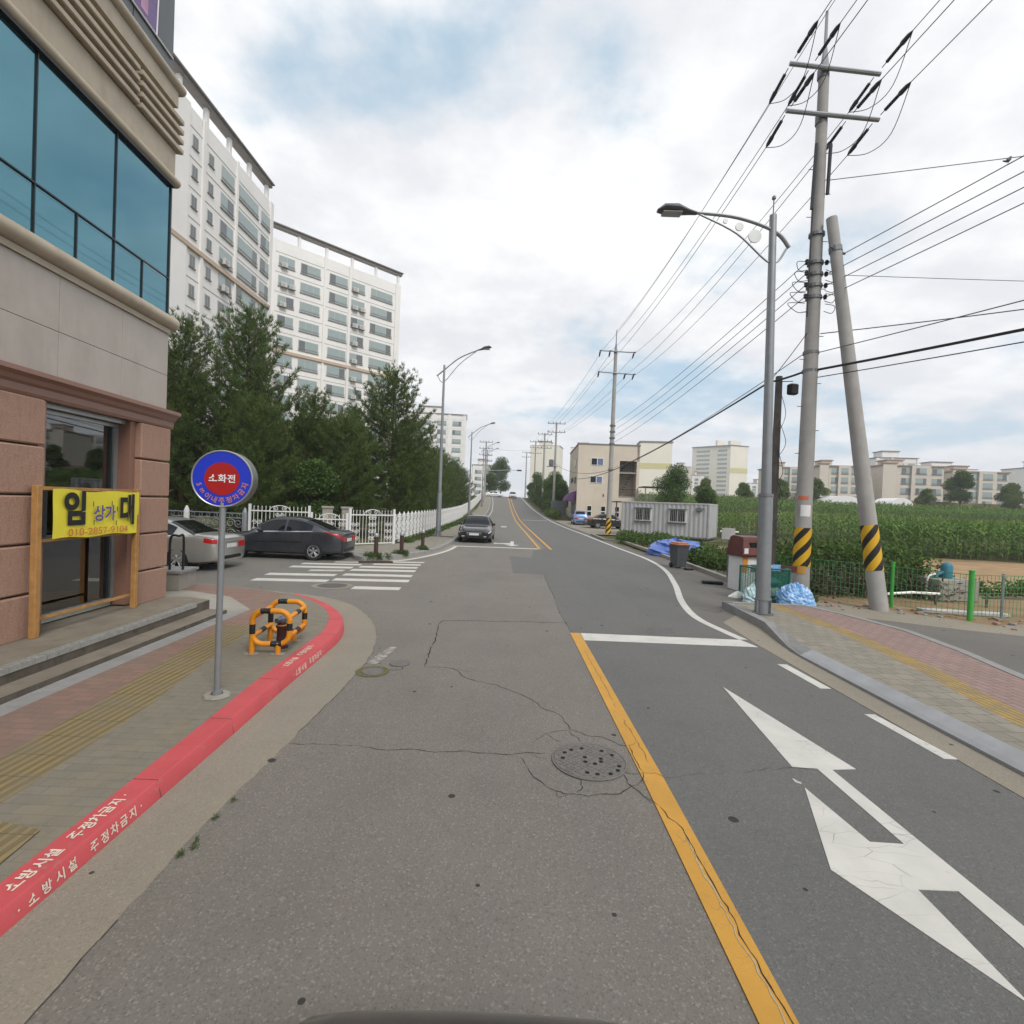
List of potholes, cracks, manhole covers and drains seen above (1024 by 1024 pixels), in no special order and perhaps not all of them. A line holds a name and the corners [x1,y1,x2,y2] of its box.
crack [289,655,664,804]
manhole cover [355,666,389,677]
crack [663,810,794,1024]
manhole cover [552,743,628,781]
